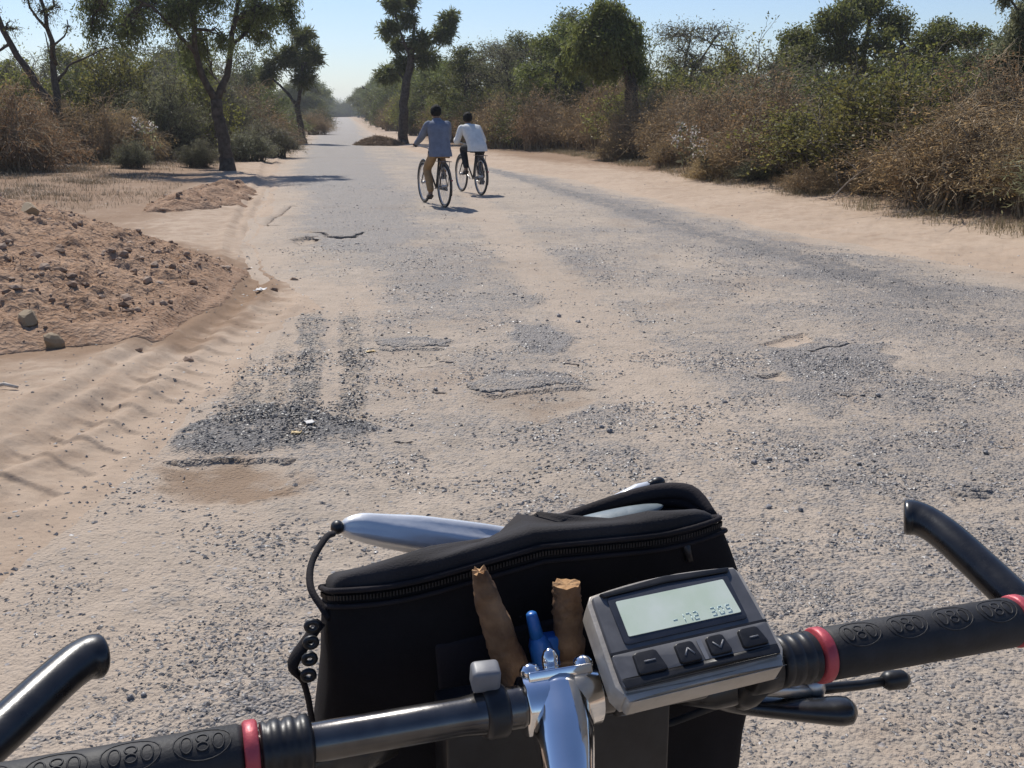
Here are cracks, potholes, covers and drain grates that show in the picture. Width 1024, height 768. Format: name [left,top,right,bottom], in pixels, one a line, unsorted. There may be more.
crack [260,205,372,240]
pothole [151,455,308,509]
crack [810,343,854,352]
